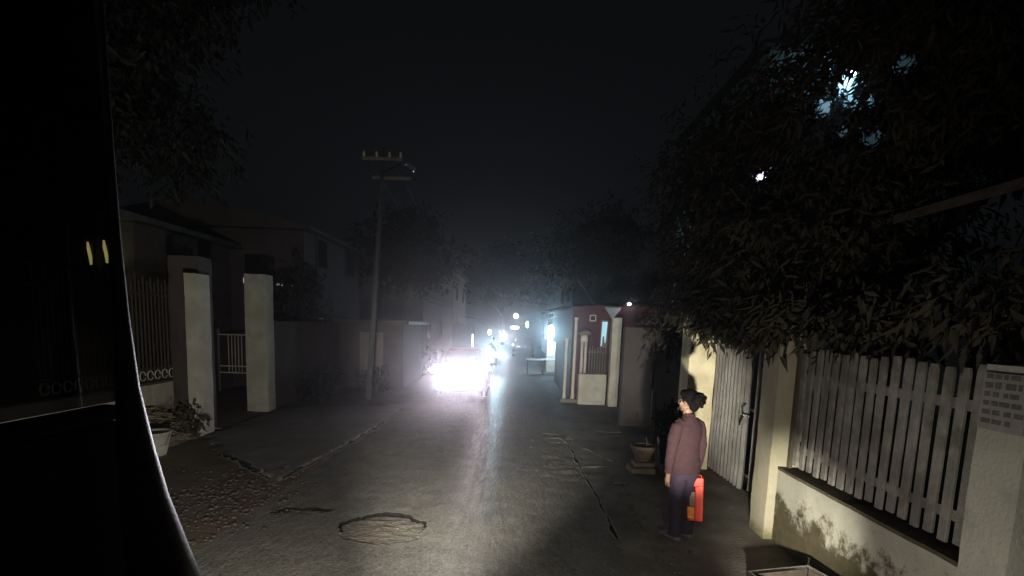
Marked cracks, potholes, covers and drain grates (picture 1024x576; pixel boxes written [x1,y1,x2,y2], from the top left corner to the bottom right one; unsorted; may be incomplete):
crack [541,410,629,541]
pothole [336,511,429,546]
